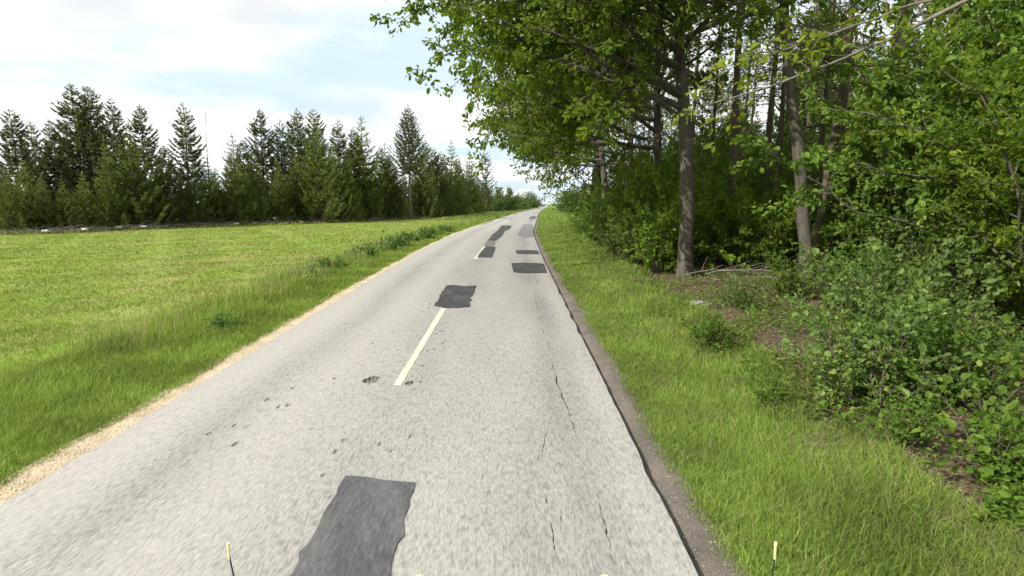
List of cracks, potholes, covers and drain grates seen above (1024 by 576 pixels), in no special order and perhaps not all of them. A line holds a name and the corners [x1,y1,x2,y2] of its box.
crack [529,276,577,435]
crack [537,423,563,553]
